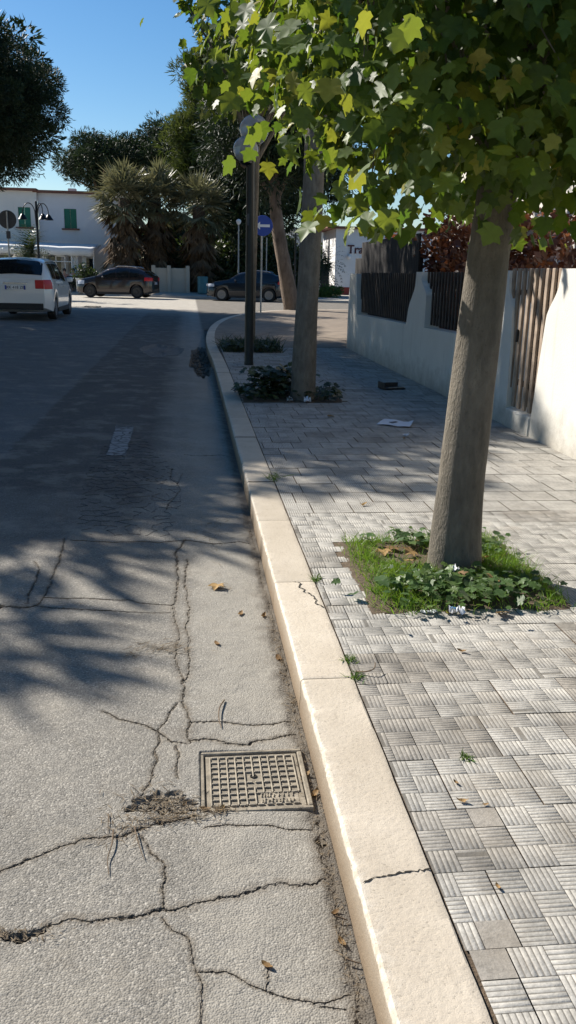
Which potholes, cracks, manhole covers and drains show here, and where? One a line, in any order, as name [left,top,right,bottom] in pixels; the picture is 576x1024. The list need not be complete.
manhole cover [200,748,314,812]
crack [0,814,361,1024]
crack [363,868,430,883]
crack [0,438,304,798]
